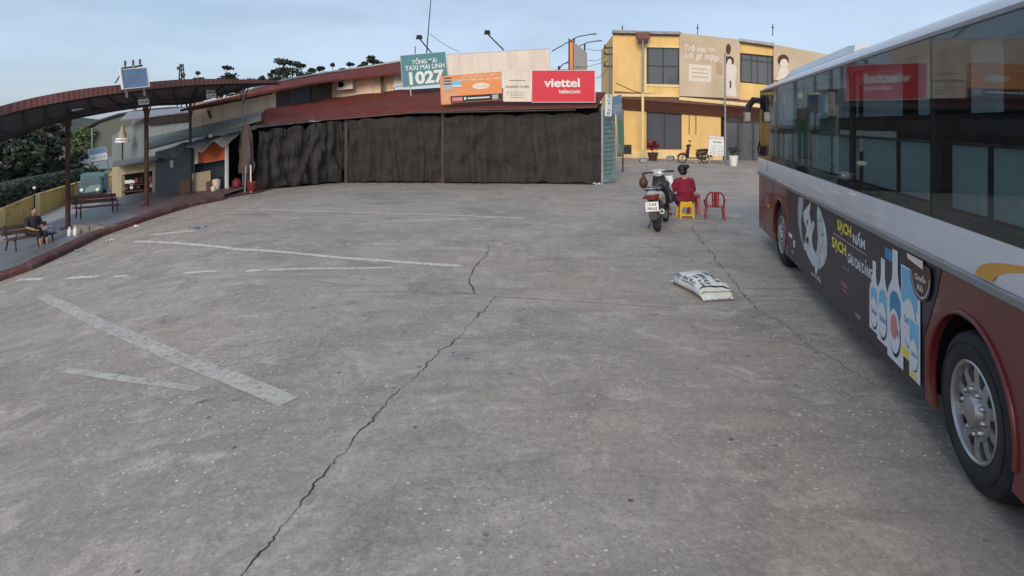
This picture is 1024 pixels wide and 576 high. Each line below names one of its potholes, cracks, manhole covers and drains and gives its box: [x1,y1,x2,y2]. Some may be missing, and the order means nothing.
crack [241,246,496,576]
crack [691,227,930,413]
